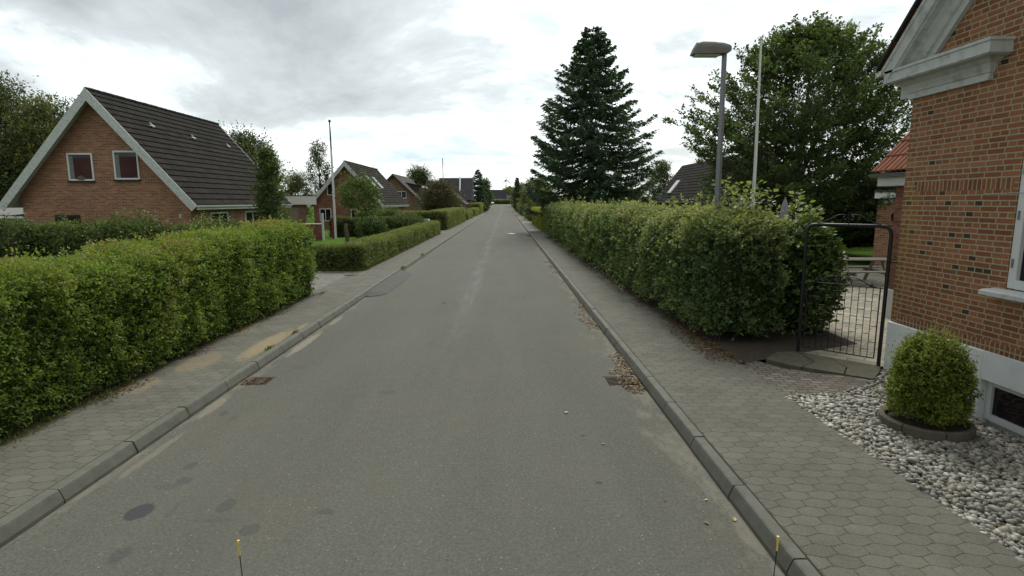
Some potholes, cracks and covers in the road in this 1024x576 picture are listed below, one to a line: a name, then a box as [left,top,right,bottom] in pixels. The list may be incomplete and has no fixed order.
drain grate [603,377,640,386]
drain grate [242,377,276,385]
